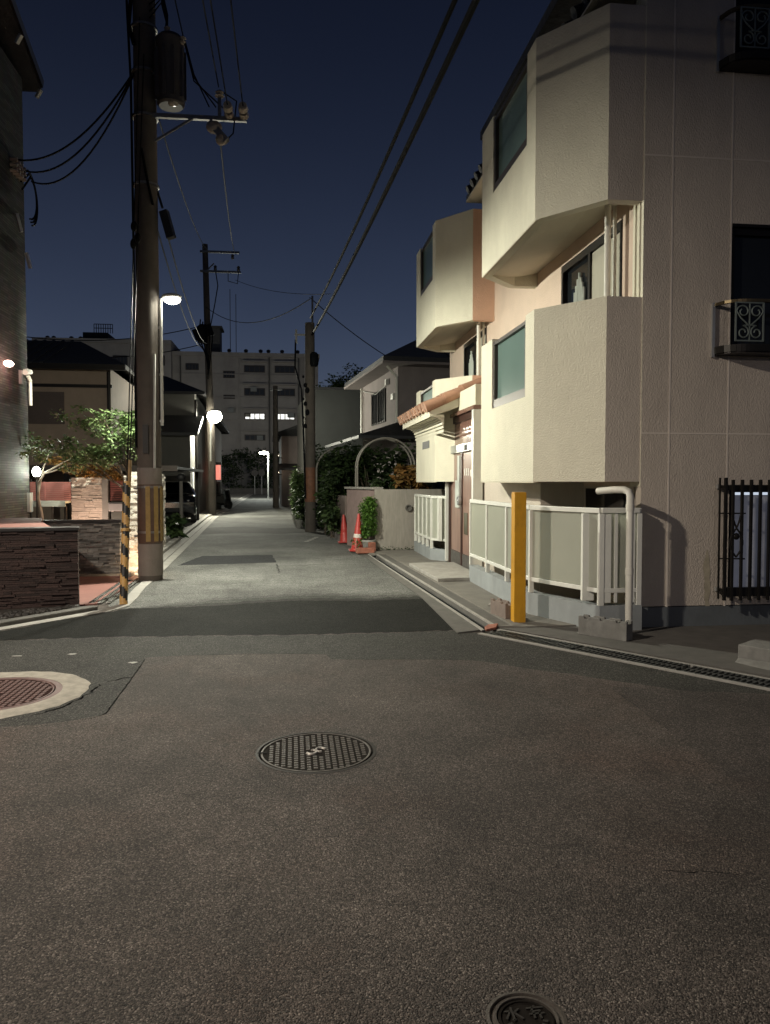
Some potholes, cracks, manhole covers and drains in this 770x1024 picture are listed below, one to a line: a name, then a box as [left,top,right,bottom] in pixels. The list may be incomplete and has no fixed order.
manhole cover [255,732,376,774]
drain grate [679,666,770,688]
utility cover [486,991,568,1024]
drain grate [575,646,690,670]
manhole cover [0,671,91,719]
drain grate [486,630,584,650]
